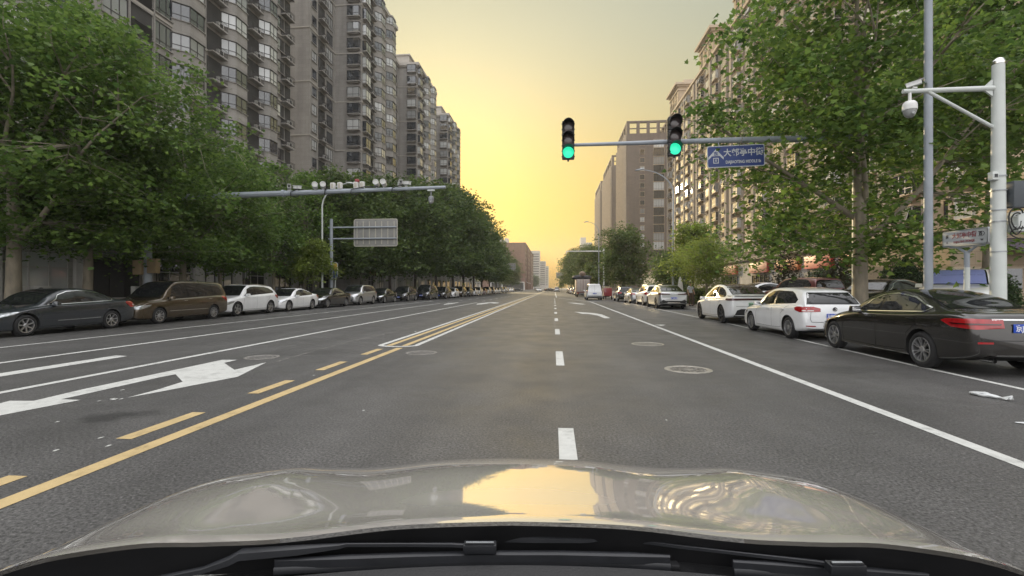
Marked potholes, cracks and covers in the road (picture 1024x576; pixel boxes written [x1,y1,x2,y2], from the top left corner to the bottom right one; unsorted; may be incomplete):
manhole cover [664,366,713,374]
